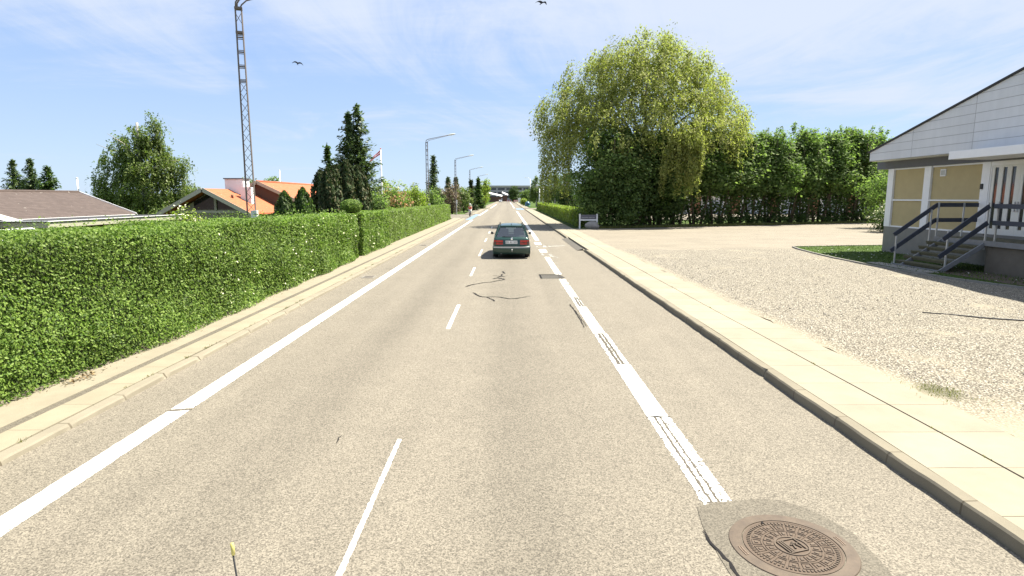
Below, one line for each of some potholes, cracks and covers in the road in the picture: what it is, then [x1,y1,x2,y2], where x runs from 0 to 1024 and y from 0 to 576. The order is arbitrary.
manhole cover [728,515,862,576]
crack [467,271,528,301]
